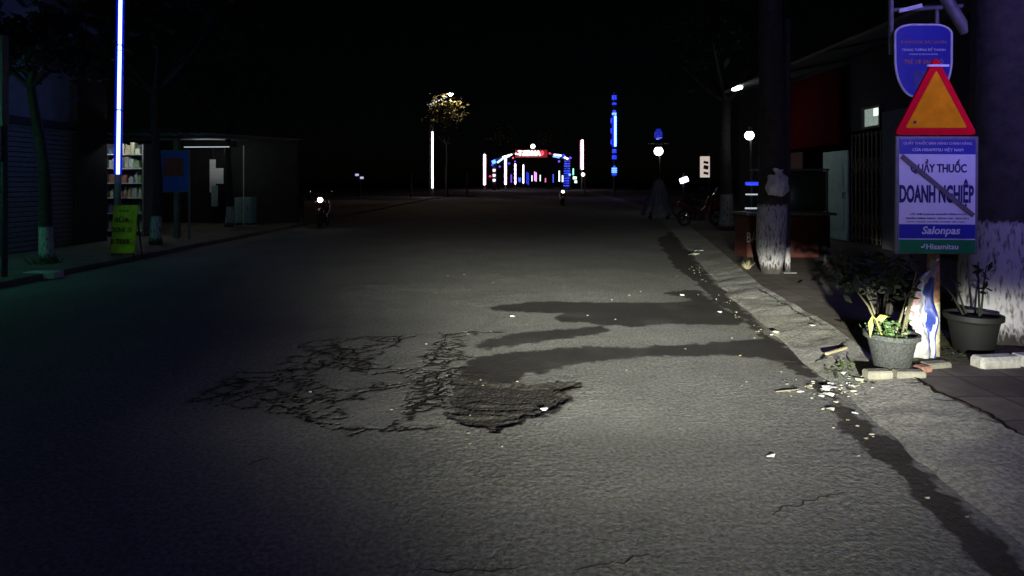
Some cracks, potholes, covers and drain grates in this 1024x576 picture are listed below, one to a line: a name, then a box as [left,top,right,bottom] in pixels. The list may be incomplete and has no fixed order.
crack [774,492,846,514]
pothole [443,377,582,433]
crack [191,331,500,435]
crack [579,554,659,573]
